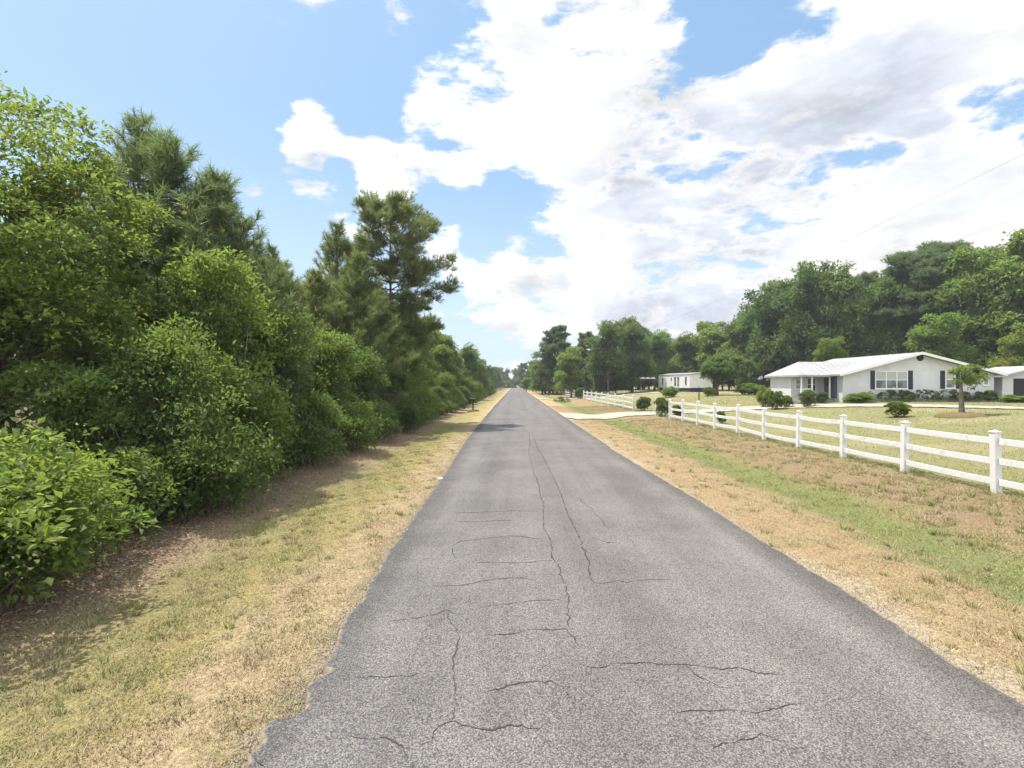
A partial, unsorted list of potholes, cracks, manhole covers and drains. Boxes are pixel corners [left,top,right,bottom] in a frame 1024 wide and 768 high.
crack [349,610,541,757]
crack [447,433,667,644]
crack [487,680,571,697]
crack [586,662,774,688]
